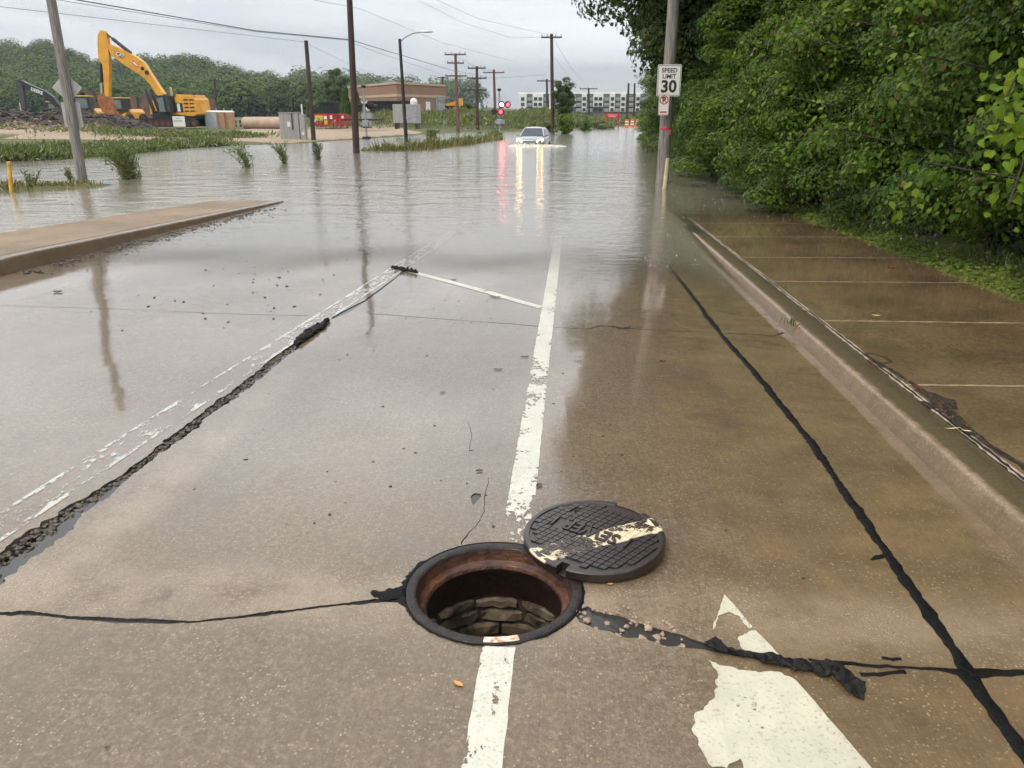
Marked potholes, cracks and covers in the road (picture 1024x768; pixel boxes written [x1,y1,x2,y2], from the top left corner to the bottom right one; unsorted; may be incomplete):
crack [0,598,399,624]
manhole cover [523,500,666,582]
manhole cover [397,542,585,646]
crack [576,604,751,658]
